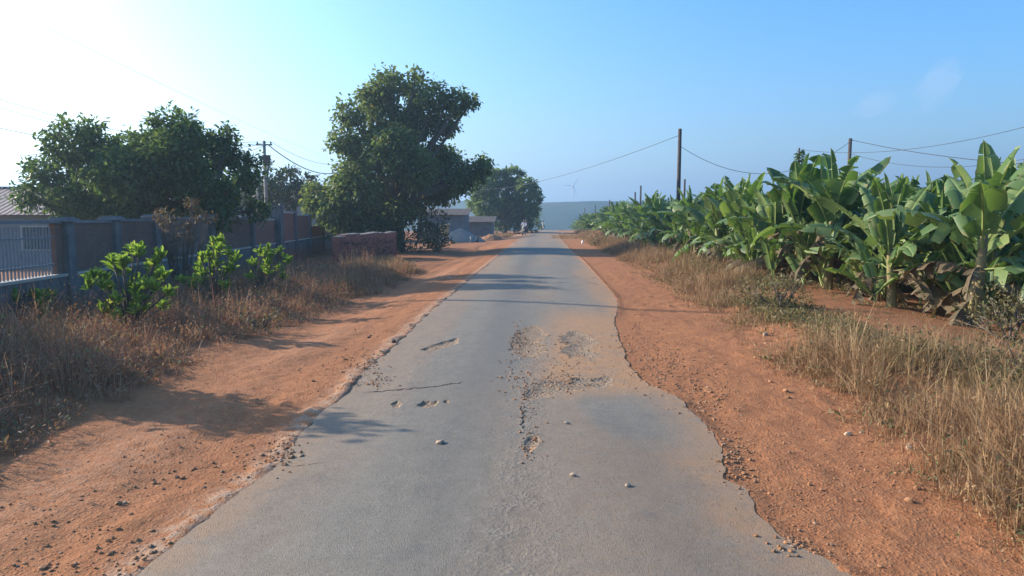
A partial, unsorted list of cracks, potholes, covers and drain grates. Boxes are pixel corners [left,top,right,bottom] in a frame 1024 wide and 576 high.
pothole [520,376,614,401]
crack [364,381,465,393]
pothole [521,435,541,454]
pothole [508,325,552,360]
pothole [416,400,439,408]
pothole [420,337,459,353]
pothole [556,331,601,362]
